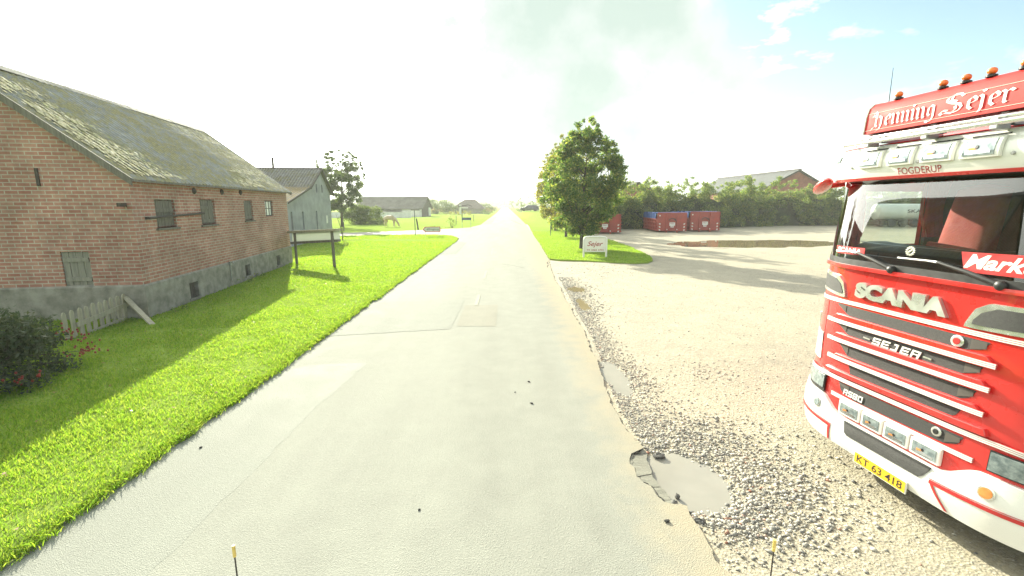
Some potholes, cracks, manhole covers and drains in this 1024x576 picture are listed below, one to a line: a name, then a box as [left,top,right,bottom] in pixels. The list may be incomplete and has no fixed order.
pothole [599,361,633,396]
pothole [630,450,732,516]
